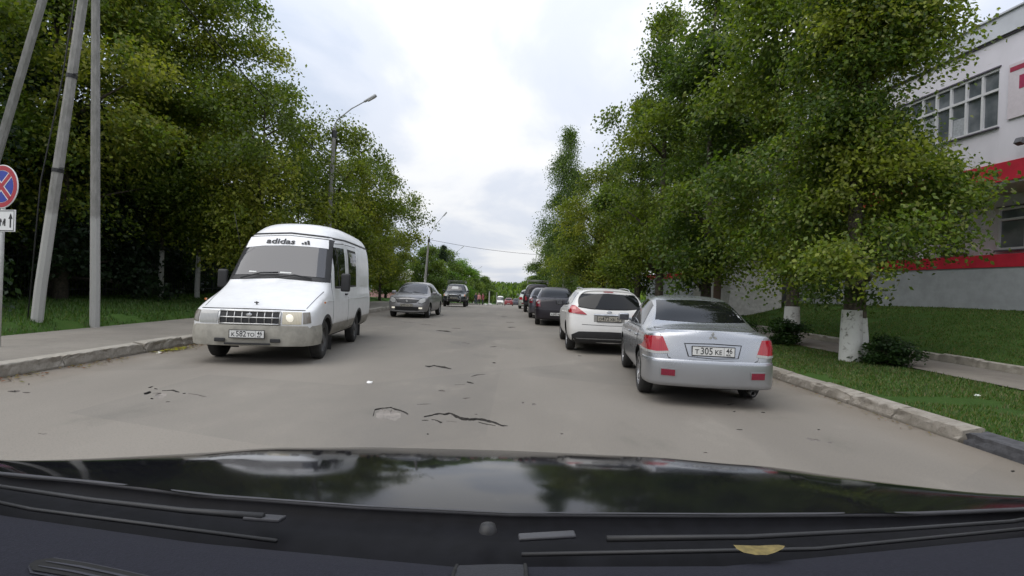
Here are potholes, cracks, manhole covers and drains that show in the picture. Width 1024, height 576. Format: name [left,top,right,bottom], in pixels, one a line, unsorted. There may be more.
pothole [376,408,401,421]
crack [425,365,484,385]
crack [373,404,508,427]
